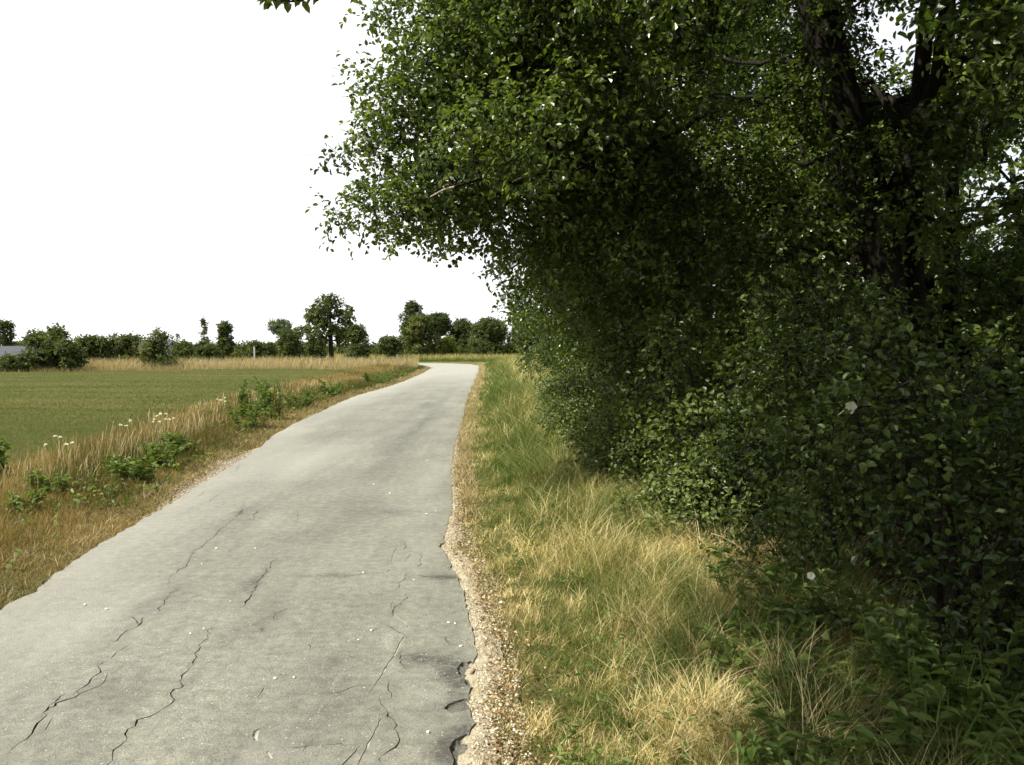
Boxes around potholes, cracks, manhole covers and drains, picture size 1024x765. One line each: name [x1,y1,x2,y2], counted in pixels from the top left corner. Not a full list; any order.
crack [245,561,273,605]
crack [276,540,422,765]
crack [9,503,258,752]
pothole [444,698,474,713]
pothole [449,734,469,765]
pothole [457,661,474,689]
